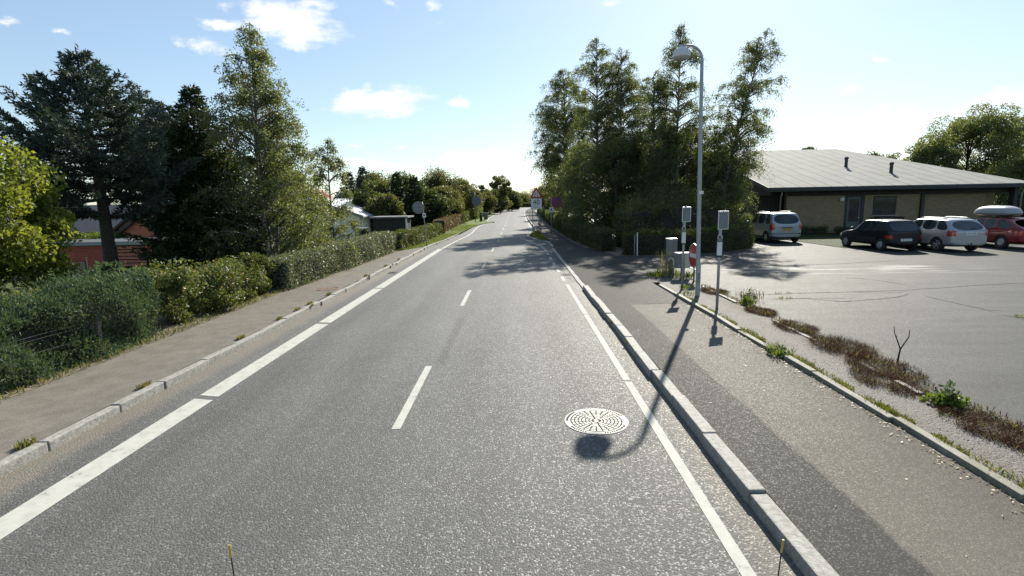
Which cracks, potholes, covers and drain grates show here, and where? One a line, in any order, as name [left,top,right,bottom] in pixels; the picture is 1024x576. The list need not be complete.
crack [760,260,1020,318]
manhole cover [564,408,629,435]
